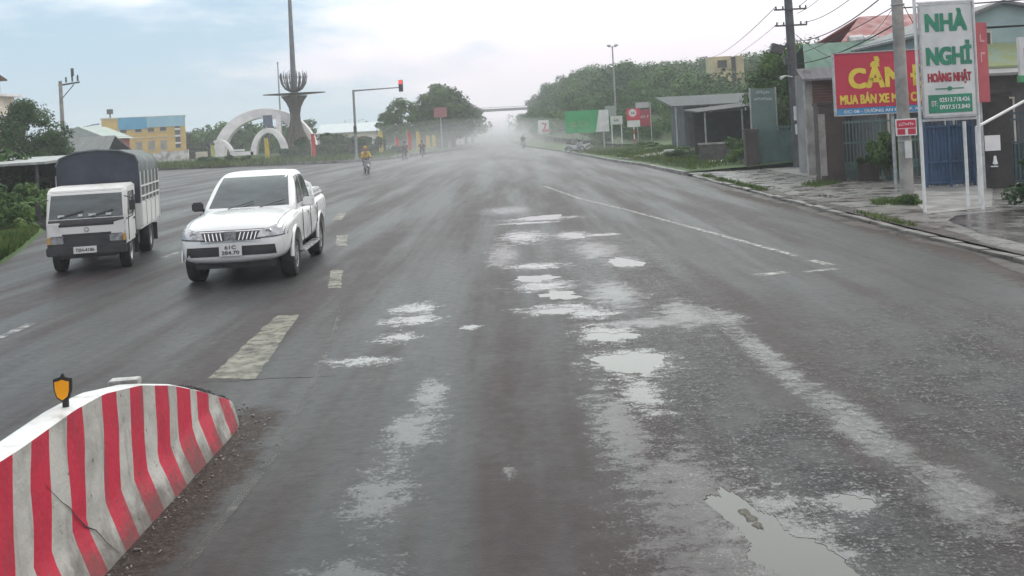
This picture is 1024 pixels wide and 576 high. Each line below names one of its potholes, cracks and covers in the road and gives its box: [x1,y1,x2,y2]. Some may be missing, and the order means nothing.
pothole [703,485,862,576]
pothole [833,493,877,510]
